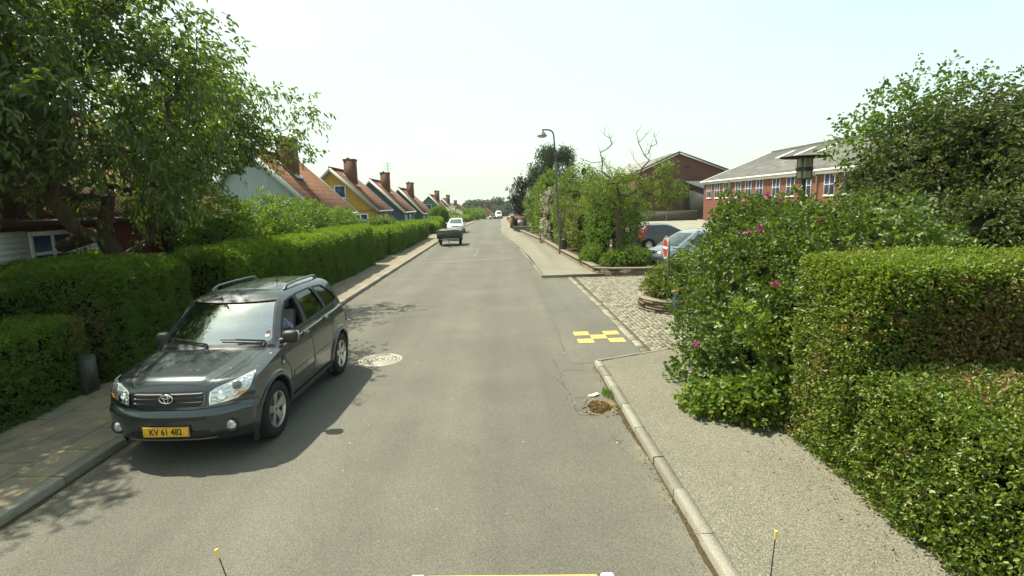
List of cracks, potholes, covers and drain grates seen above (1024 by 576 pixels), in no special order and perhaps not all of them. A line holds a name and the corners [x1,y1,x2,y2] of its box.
manhole cover [358,353,403,367]
crack [552,360,623,450]
pothole [581,399,619,417]
